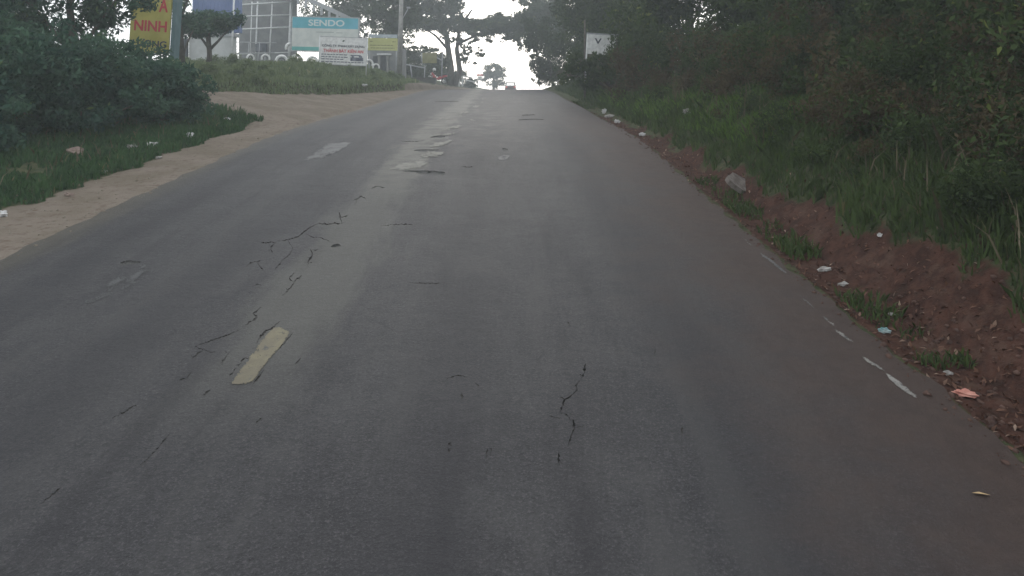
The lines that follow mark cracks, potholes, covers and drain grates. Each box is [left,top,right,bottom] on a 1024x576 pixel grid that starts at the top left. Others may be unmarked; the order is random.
crack [180,307,301,395]
crack [247,186,384,295]
crack [551,363,586,465]
